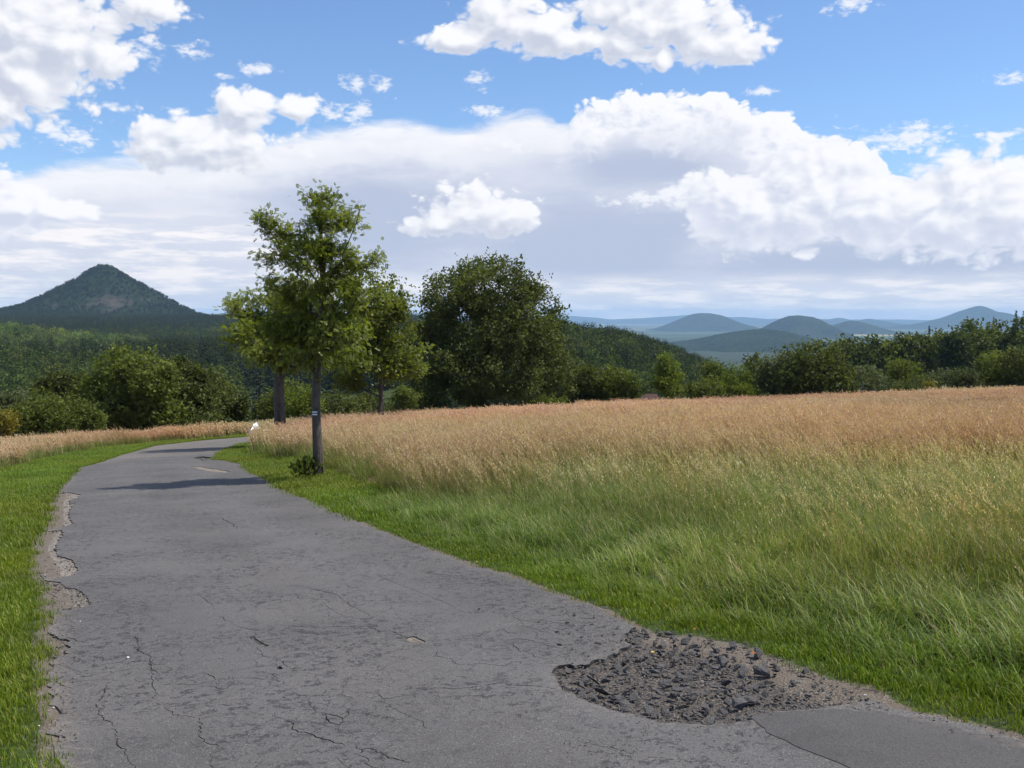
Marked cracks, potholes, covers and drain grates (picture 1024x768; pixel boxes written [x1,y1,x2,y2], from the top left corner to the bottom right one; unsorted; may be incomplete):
pothole [60,492,80,527]
pothole [44,580,91,610]
pothole [43,530,79,578]
crack [197,592,408,768]
crack [135,636,220,766]
crack [59,669,136,768]
pothole [551,627,870,725]
